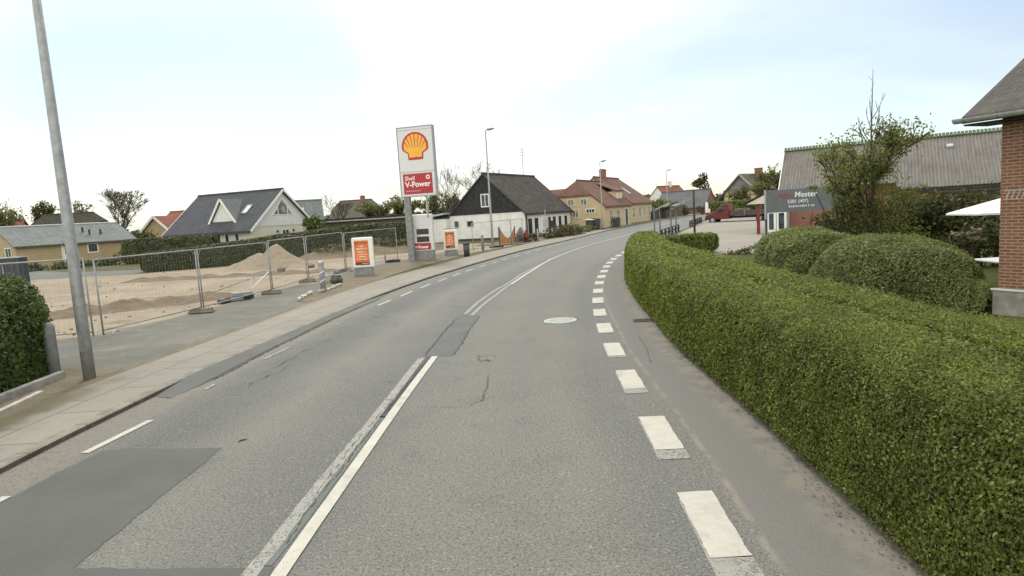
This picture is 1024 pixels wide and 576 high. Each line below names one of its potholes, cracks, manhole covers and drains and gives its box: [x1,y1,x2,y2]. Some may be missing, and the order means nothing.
crack [431,355,496,407]
